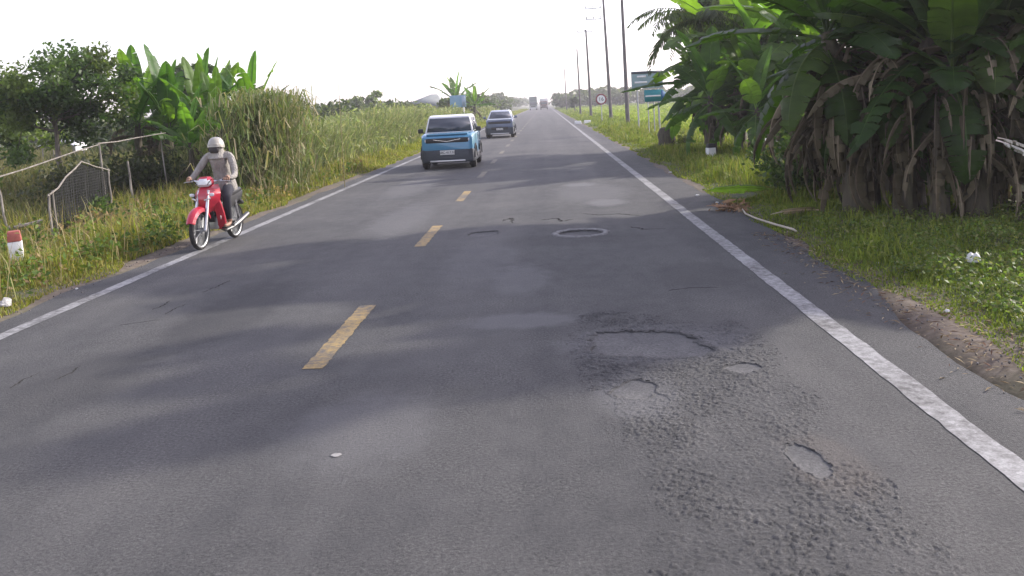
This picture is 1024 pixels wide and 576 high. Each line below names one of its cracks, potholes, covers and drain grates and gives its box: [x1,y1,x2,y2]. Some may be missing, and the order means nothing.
pothole [605,378,660,400]
pothole [582,328,729,361]
pothole [781,440,836,481]
pothole [722,362,763,373]
